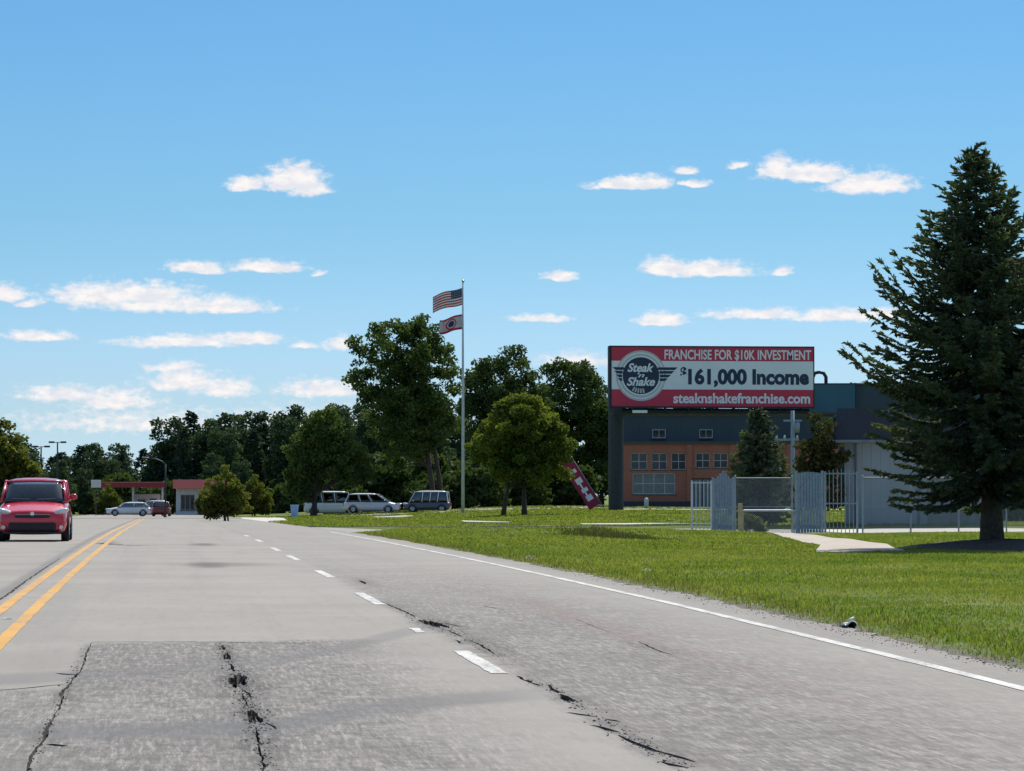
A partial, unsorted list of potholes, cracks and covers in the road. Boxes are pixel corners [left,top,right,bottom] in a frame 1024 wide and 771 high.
crack [221,645,276,771]
crack [10,644,91,771]
crack [517,676,694,768]
crack [383,602,494,654]
